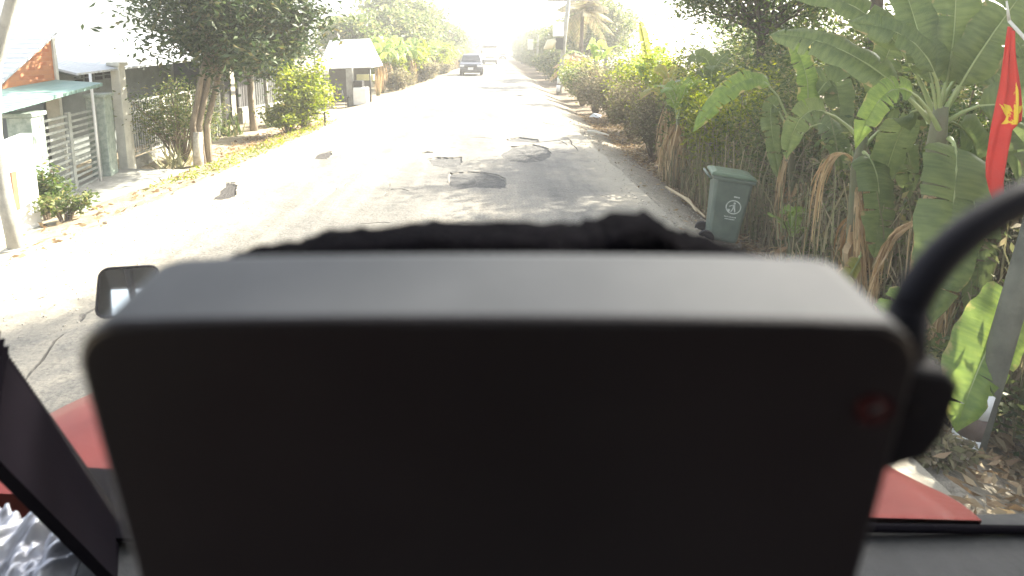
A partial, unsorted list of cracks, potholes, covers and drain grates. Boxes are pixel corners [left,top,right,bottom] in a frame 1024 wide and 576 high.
crack [25,308,95,379]
pothole [500,144,551,163]
pothole [212,182,238,200]
pothole [313,151,332,159]
pothole [427,157,462,168]
pothole [447,171,507,189]
